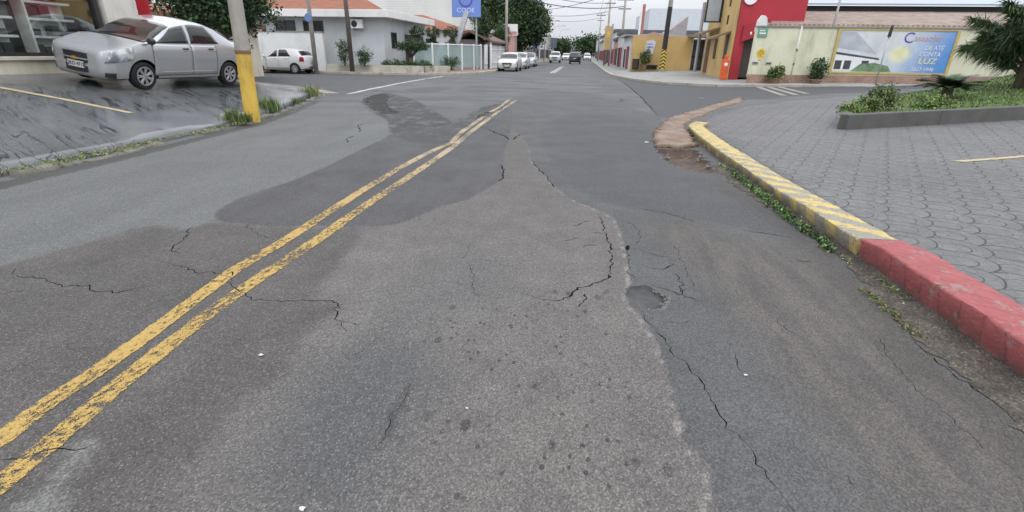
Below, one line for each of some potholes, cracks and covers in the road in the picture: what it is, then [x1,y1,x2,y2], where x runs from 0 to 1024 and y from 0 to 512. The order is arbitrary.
crack [642,312,794,512]
crack [524,208,700,306]
crack [915,342,996,404]
crack [4,270,149,294]
pothole [625,285,673,311]
crack [170,227,358,334]
